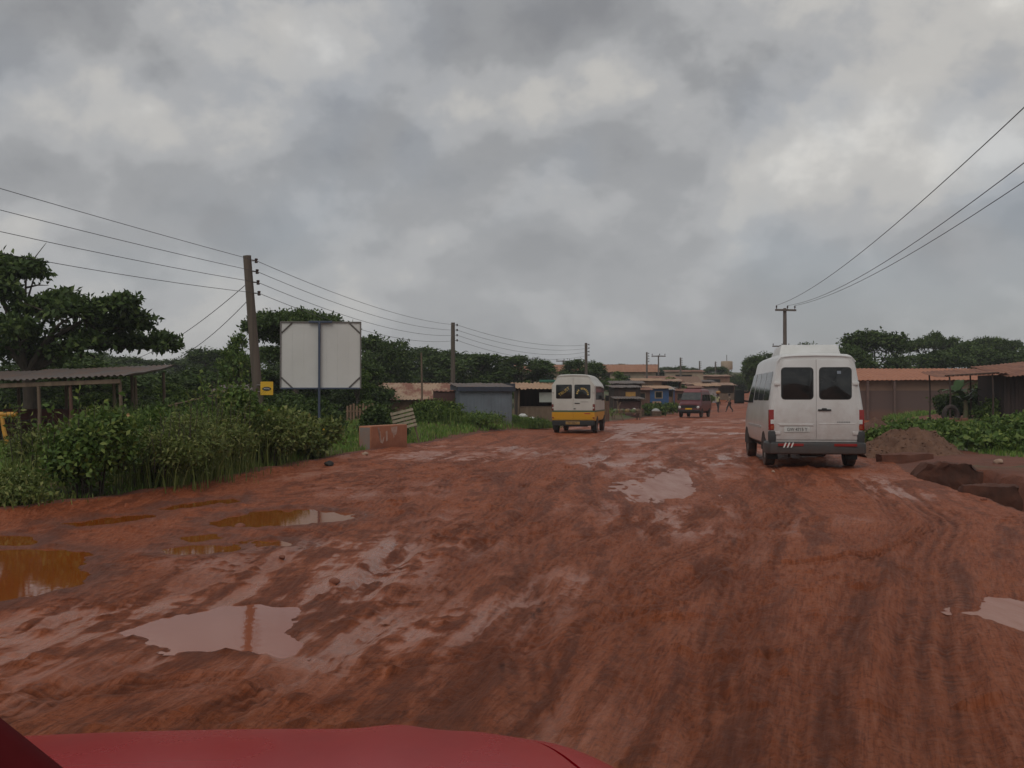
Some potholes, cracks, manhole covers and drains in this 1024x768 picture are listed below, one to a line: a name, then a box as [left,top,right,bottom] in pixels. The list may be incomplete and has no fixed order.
pothole [194,504,367,529]
pothole [147,543,258,557]
pothole [49,510,167,529]
pothole [91,600,327,663]
pothole [0,543,114,602]
